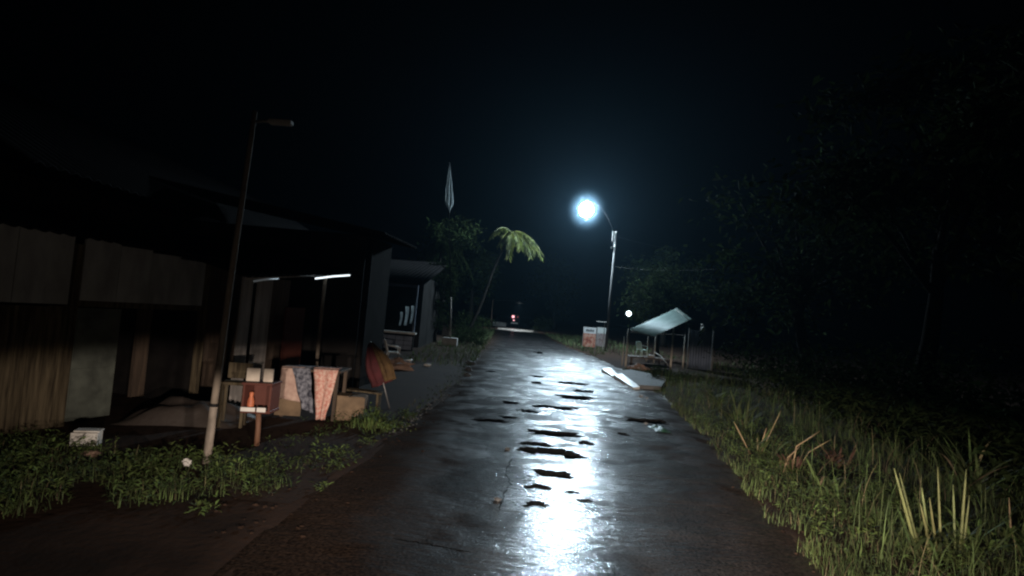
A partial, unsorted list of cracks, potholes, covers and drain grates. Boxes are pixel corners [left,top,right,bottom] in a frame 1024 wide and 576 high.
pothole [624,416,670,425]
pothole [524,429,586,438]
pothole [531,468,575,479]
crack [393,538,471,553]
pothole [521,501,549,510]
crack [499,457,513,512]
pothole [516,446,590,459]
